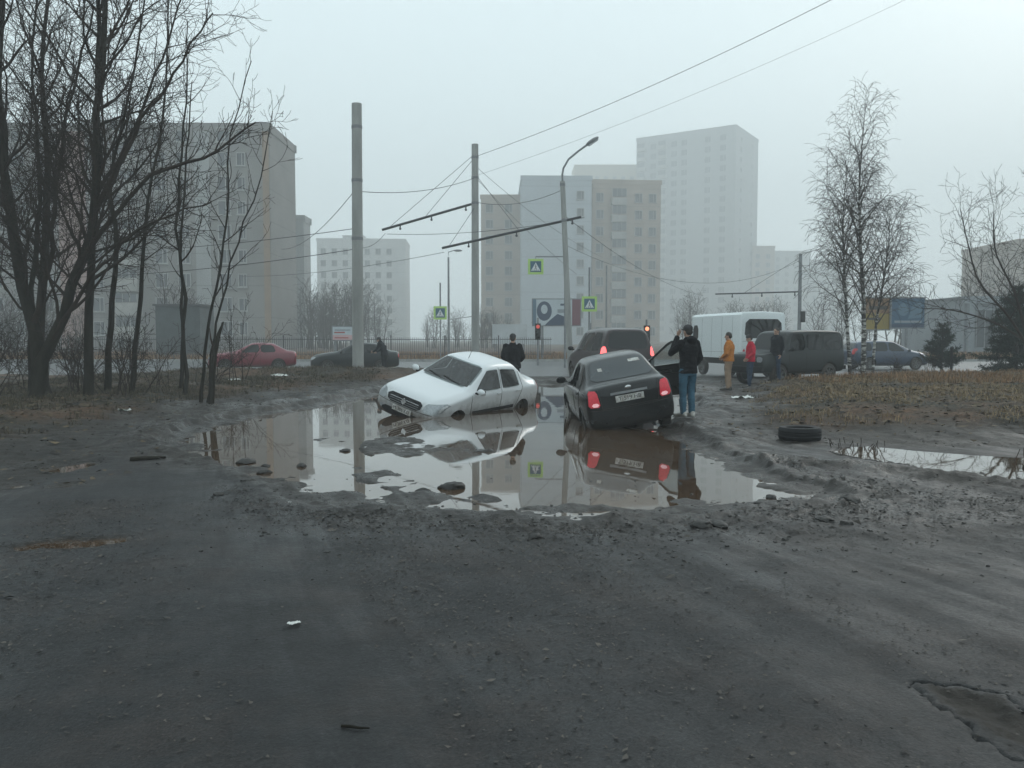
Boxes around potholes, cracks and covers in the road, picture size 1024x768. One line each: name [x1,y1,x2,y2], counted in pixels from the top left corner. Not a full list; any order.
pothole [7,535,134,552]
pothole [906,683,1024,761]
pothole [130,380,879,529]
pothole [35,461,104,474]
pothole [831,446,1024,477]
